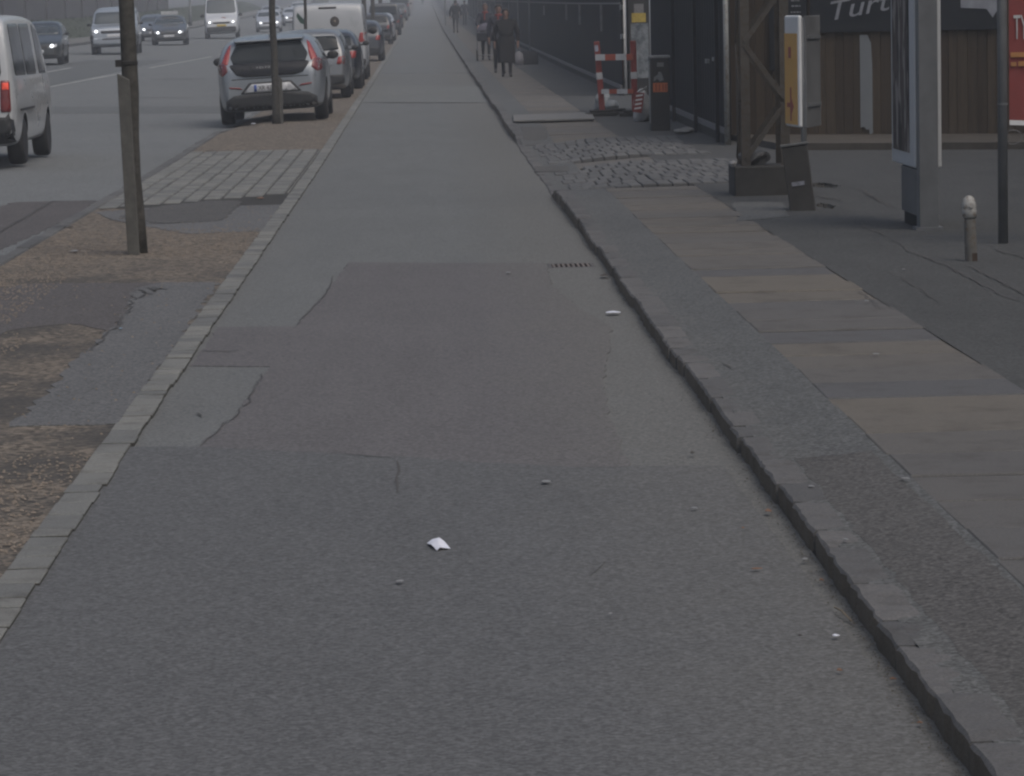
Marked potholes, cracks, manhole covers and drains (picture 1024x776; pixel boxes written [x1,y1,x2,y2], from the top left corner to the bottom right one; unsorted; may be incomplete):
crack [820,186,1024,302]
crack [297,275,333,325]
crack [323,452,401,493]
crack [84,287,164,352]
crack [197,373,263,446]
